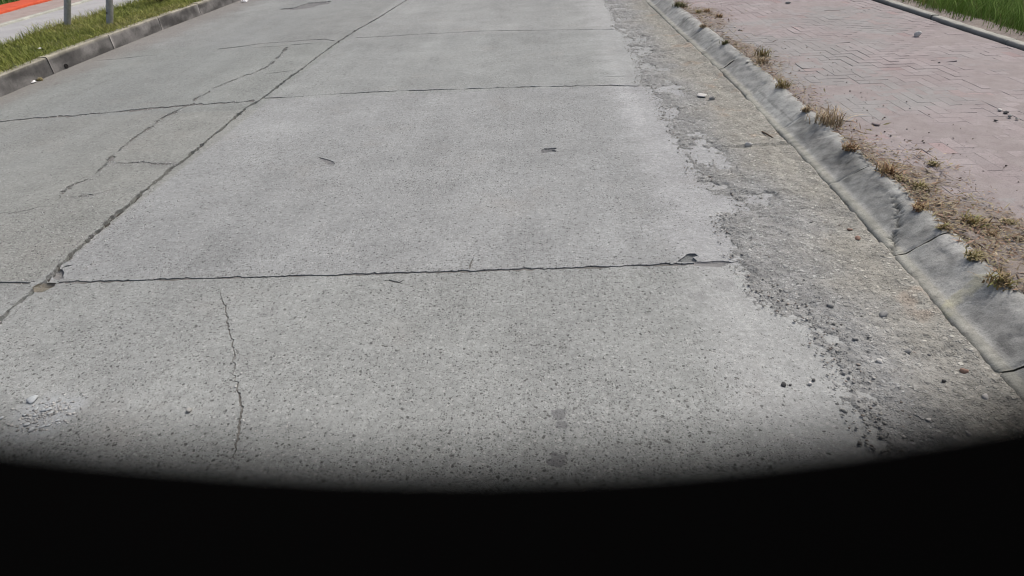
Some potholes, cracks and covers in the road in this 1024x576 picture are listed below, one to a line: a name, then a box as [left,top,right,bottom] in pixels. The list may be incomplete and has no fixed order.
pothole [677,253,698,262]
